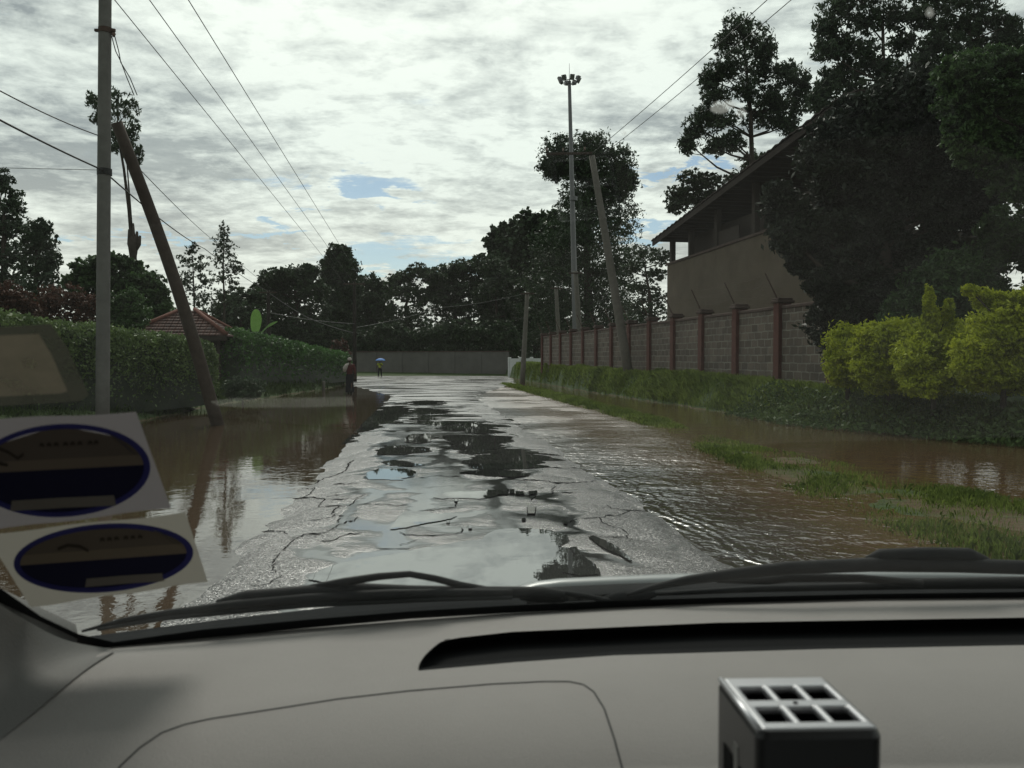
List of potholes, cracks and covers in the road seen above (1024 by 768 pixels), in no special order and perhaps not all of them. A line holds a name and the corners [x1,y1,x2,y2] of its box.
crack [250,445,464,586]
pothole [562,546,599,576]
pothole [589,535,632,561]
crack [570,505,650,543]
crack [518,453,592,500]
